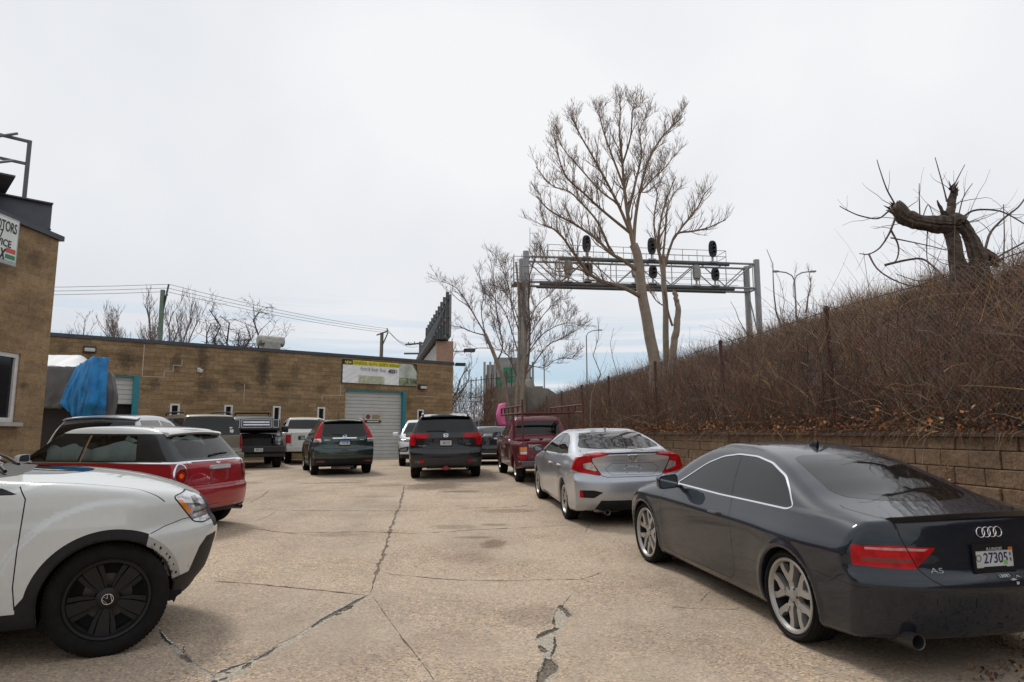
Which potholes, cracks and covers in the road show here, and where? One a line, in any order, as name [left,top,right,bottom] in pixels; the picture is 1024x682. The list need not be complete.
crack [215,484,625,680]
